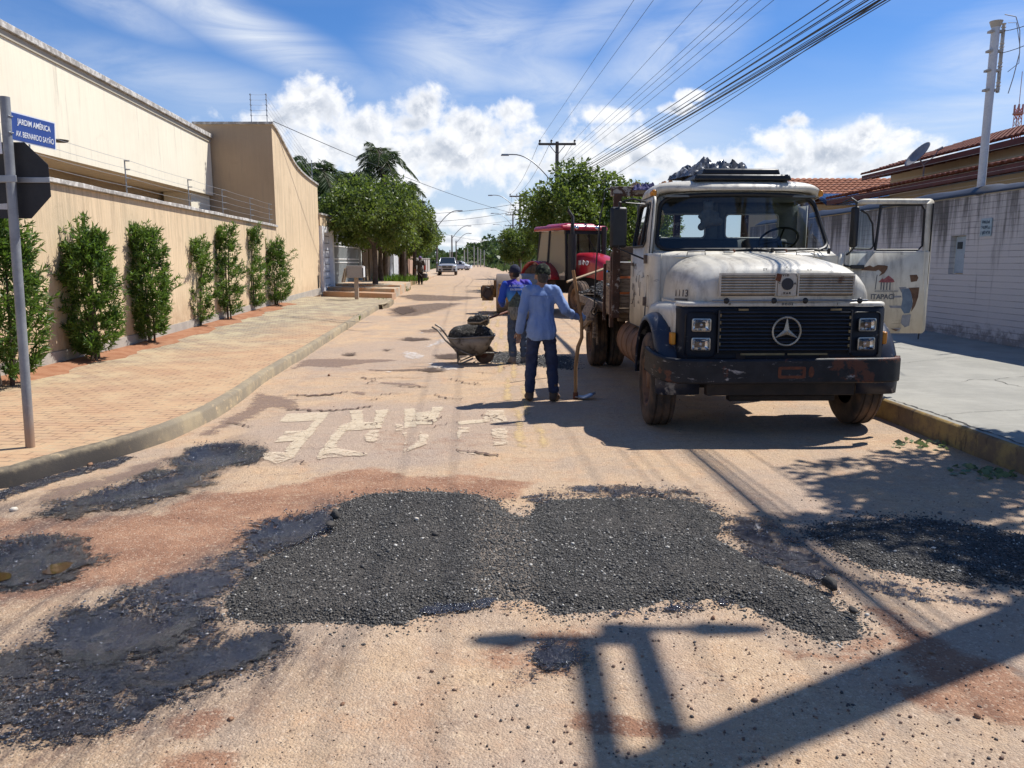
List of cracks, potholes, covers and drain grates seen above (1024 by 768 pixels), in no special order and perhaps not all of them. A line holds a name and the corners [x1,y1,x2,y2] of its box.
crack [286,363,521,411]
pothole [0,534,122,592]
